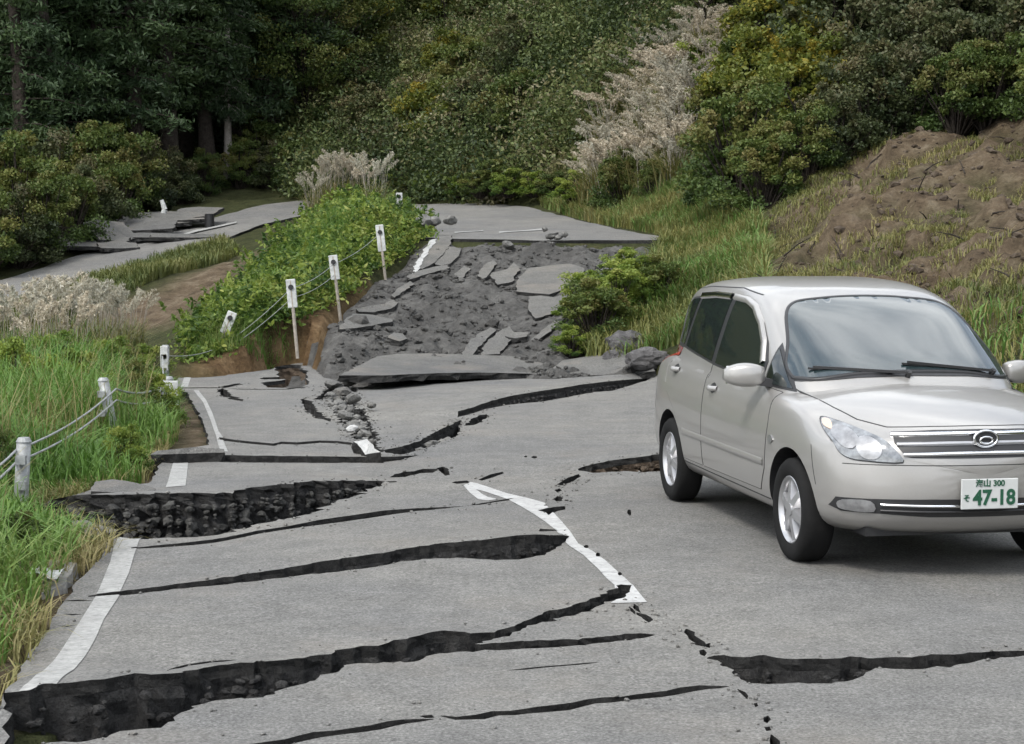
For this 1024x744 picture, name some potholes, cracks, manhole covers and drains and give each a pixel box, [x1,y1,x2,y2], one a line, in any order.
pothole [260,365,309,389]
crack [2,379,1024,744]
